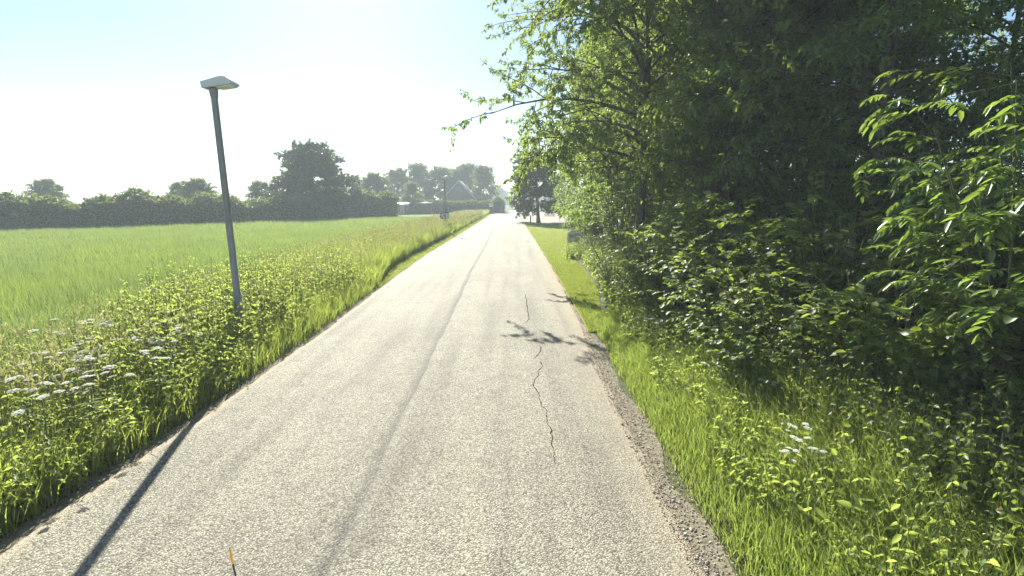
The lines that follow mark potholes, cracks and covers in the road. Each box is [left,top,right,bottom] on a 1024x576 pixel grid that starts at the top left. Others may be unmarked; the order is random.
crack [533,346,555,462]
